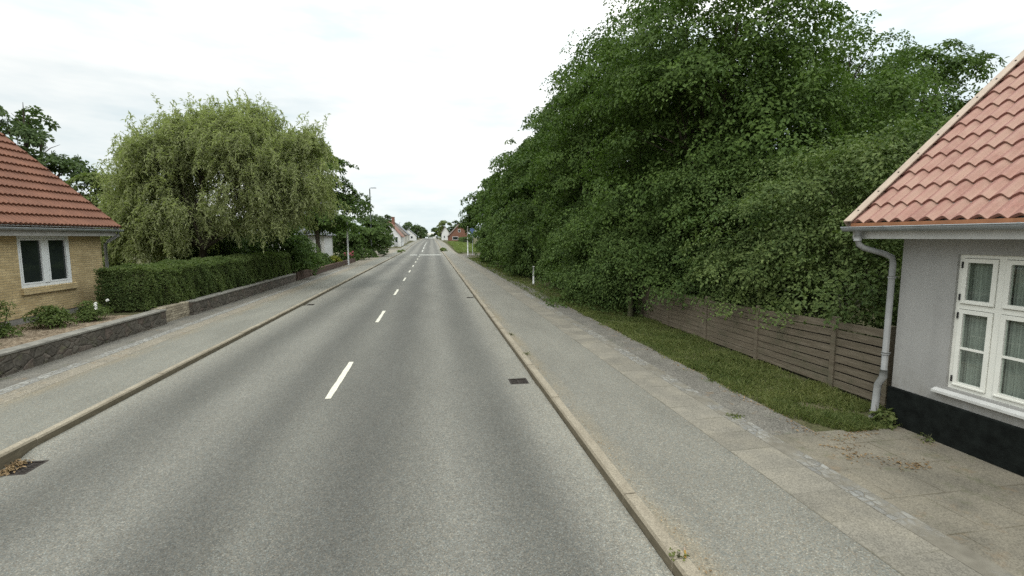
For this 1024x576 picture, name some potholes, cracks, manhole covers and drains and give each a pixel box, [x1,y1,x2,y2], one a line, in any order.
drain grate [3,460,49,476]
